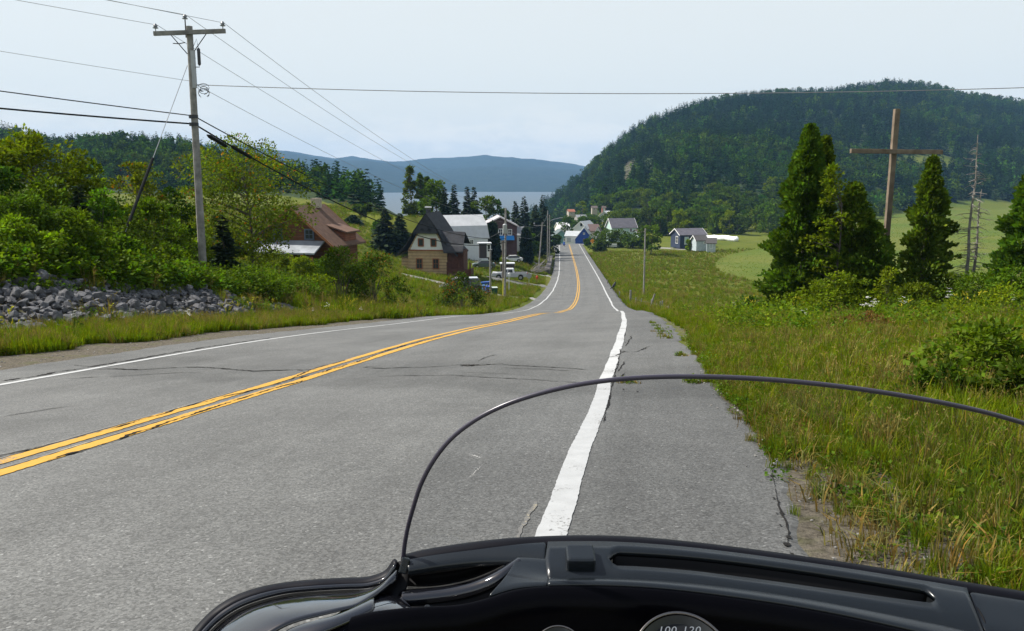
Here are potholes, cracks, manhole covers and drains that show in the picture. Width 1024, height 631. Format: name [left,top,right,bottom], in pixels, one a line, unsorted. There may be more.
crack [603,334,653,422]
crack [363,355,588,371]
crack [770,453,794,555]
